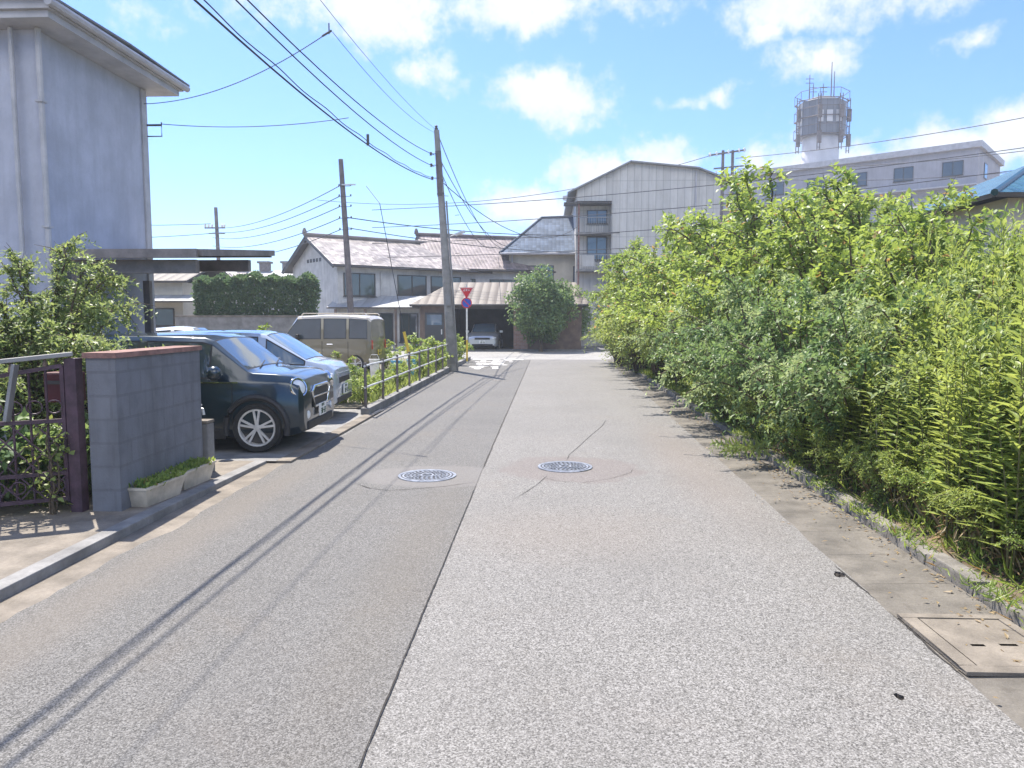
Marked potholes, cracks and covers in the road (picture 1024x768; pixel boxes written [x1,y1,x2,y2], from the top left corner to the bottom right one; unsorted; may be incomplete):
manhole cover [398,469,456,482]
manhole cover [538,461,593,472]
